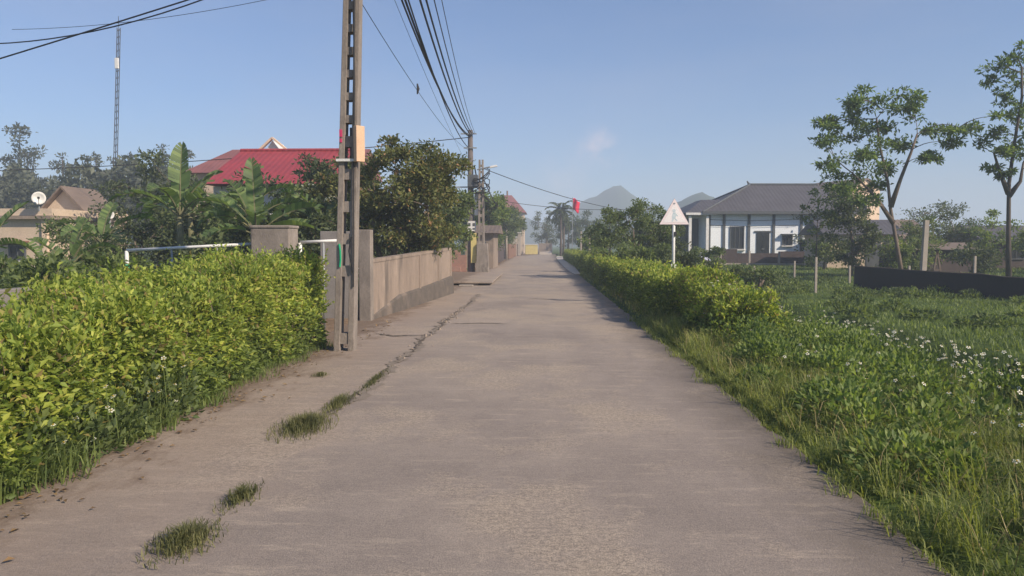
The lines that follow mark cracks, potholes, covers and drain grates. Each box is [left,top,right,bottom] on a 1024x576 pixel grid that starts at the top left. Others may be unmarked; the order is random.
crack [320,294,501,418]
